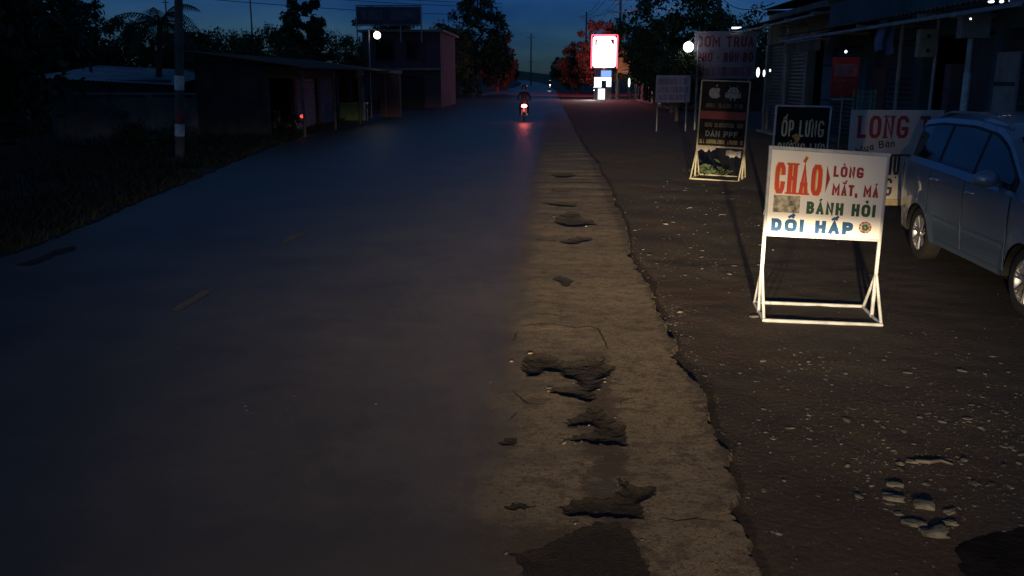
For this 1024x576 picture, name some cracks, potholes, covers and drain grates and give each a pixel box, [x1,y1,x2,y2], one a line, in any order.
crack [513,313,608,349]
pothole [558,478,669,520]
pothole [561,406,629,447]
pothole [498,438,517,446]
pothole [553,276,574,287]
pothole [504,521,650,576]
pothole [510,352,616,402]
pothole [559,236,593,245]
pothole [504,503,536,511]
pothole [553,211,597,227]
